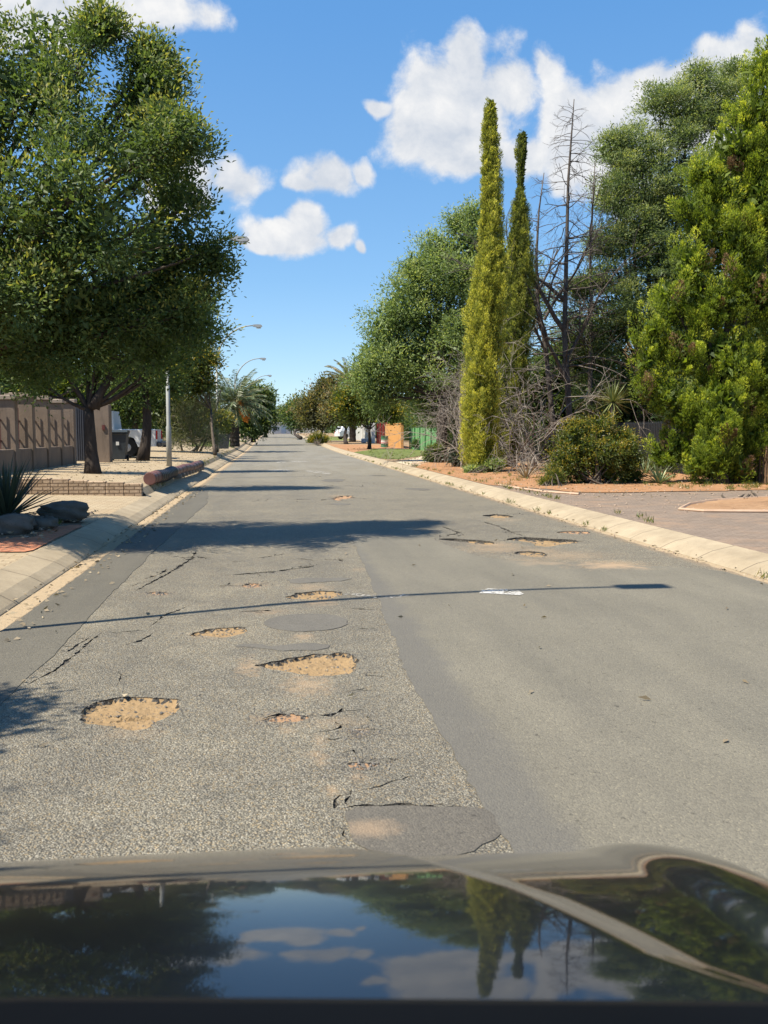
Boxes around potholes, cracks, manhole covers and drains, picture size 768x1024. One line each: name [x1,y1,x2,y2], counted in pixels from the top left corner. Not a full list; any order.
pothole [176,625,247,639]
crack [263,672,463,841]
pothole [284,588,363,600]
pothole [239,650,375,677]
pothole [502,536,589,547]
crack [29,606,188,684]
pothole [50,691,200,734]
crack [135,551,207,591]
